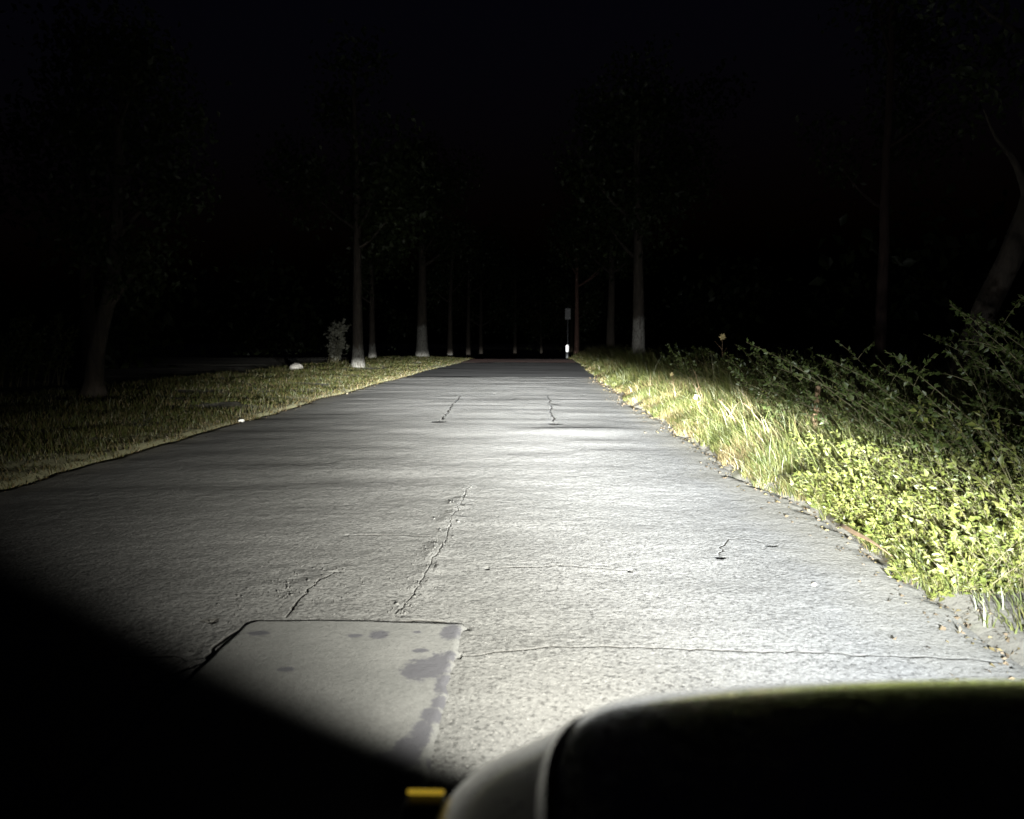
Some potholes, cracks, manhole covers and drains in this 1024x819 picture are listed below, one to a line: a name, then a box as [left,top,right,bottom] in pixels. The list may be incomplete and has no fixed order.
crack [488,562,629,574]
crack [496,393,582,425]
crack [708,536,777,559]
crack [65,572,1012,688]
crack [427,395,470,422]
